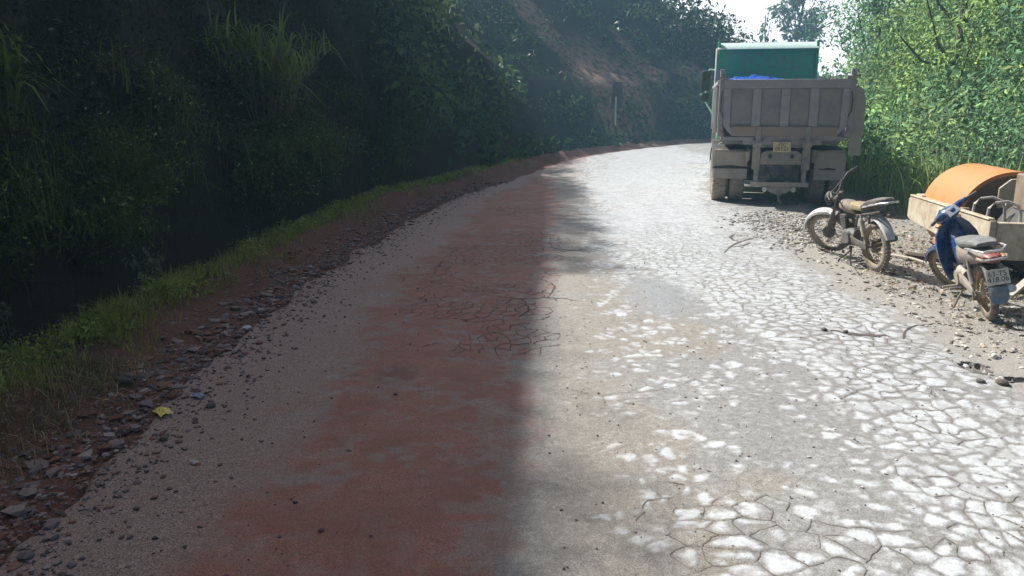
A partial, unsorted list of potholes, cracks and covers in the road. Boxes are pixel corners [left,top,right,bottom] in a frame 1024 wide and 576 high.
crack [567,222,1024,576]
crack [391,206,587,355]
pothole [955,361,993,374]
